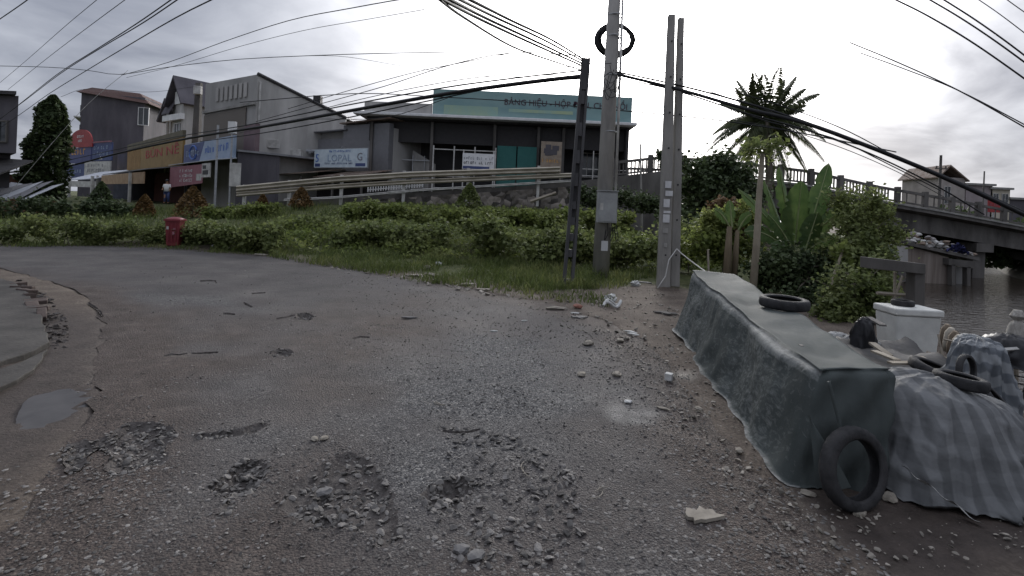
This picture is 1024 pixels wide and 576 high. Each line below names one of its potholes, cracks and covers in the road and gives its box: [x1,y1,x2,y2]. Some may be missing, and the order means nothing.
pothole [412,467,483,517]
pothole [52,416,185,479]
pothole [294,312,316,321]
pothole [265,448,421,560]
pothole [192,455,281,522]
pothole [265,348,305,358]
crack [87,302,104,317]
pothole [184,418,271,440]
